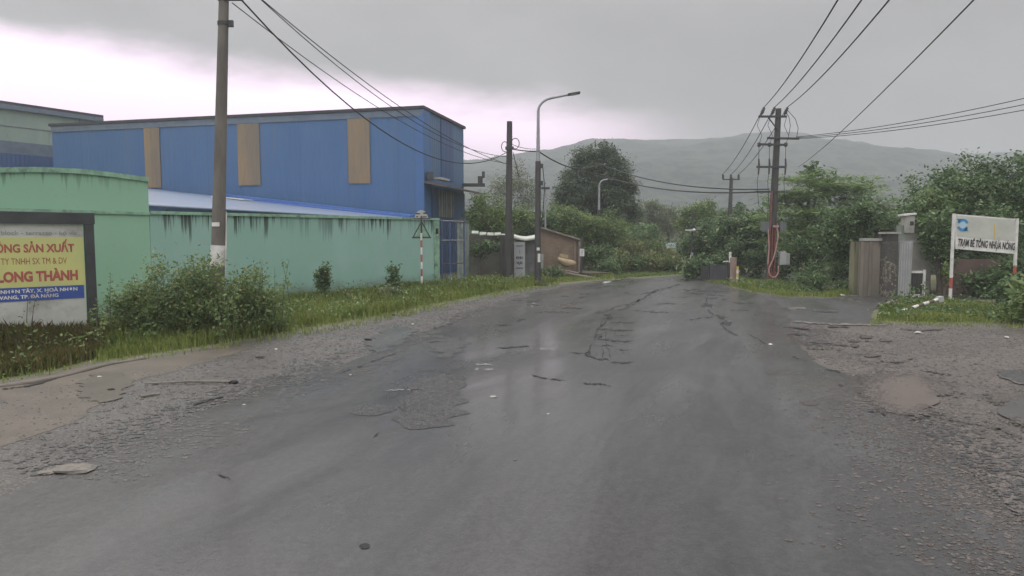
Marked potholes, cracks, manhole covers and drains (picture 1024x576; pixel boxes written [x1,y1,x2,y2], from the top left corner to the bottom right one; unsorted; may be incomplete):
crack [500,284,768,364]
pothole [350,404,397,416]
pothole [391,373,470,429]
